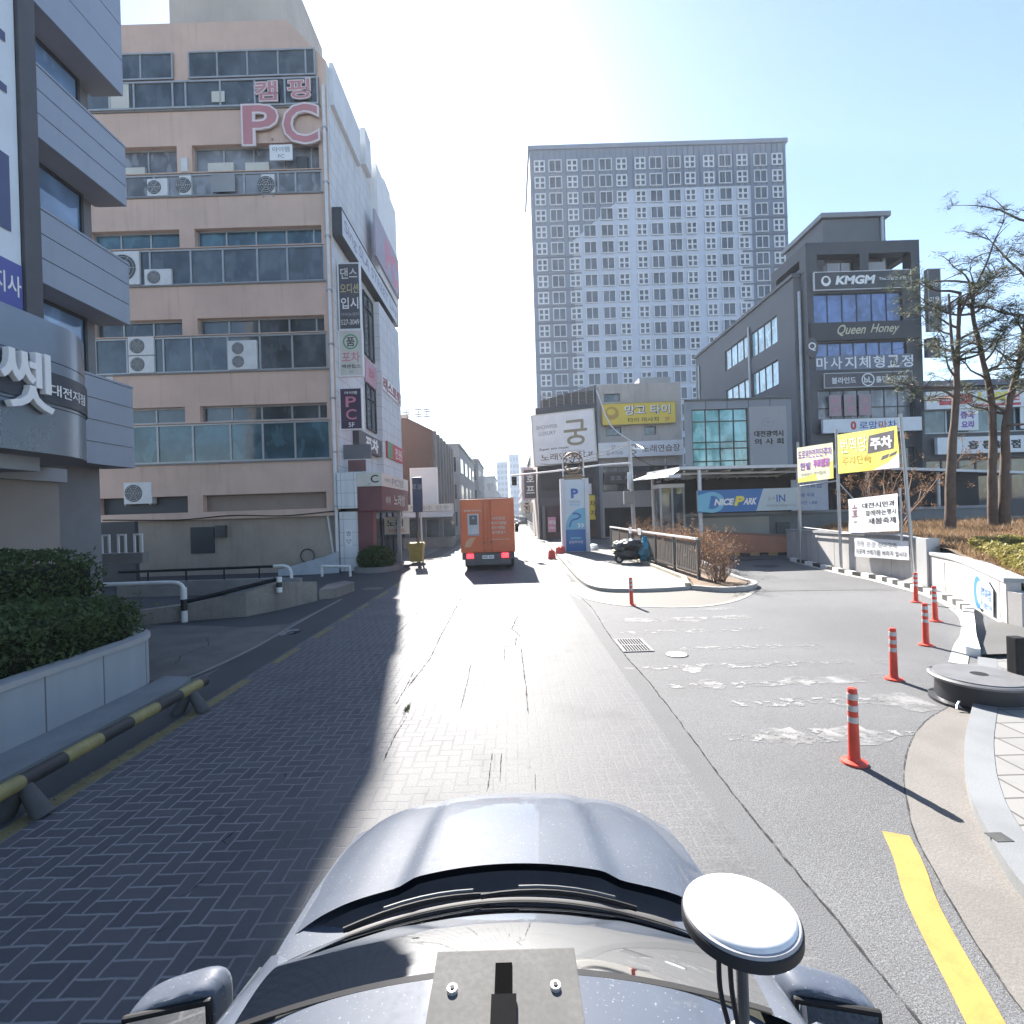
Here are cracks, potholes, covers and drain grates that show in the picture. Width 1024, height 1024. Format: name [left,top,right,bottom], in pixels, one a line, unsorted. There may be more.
crack [493,599,529,712]
drain grate [613,638,654,652]
